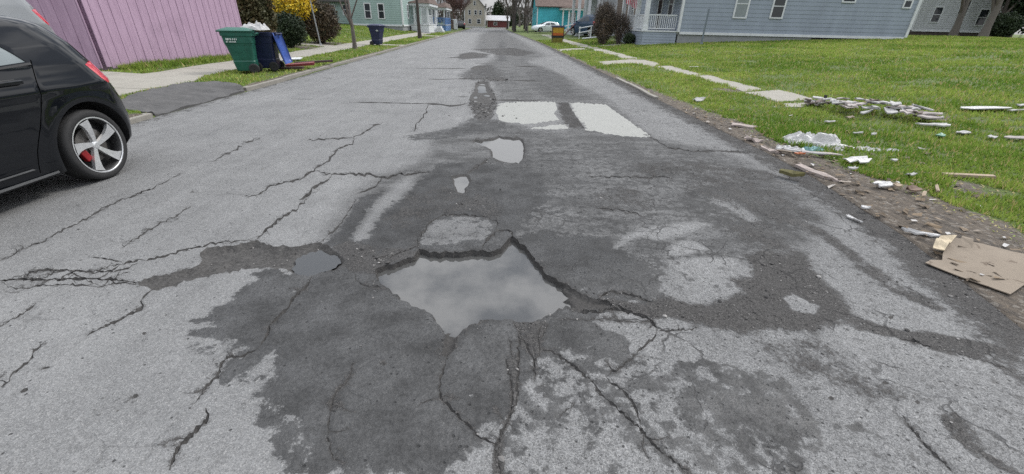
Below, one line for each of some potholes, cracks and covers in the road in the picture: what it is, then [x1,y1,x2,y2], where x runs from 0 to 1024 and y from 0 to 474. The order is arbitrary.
pothole [472,136,525,163]
crack [165,276,312,470]
crack [0,344,53,387]
crack [419,290,697,474]
pothole [375,236,612,357]
crack [0,124,382,336]
pothole [469,81,494,104]
pothole [452,174,472,195]
